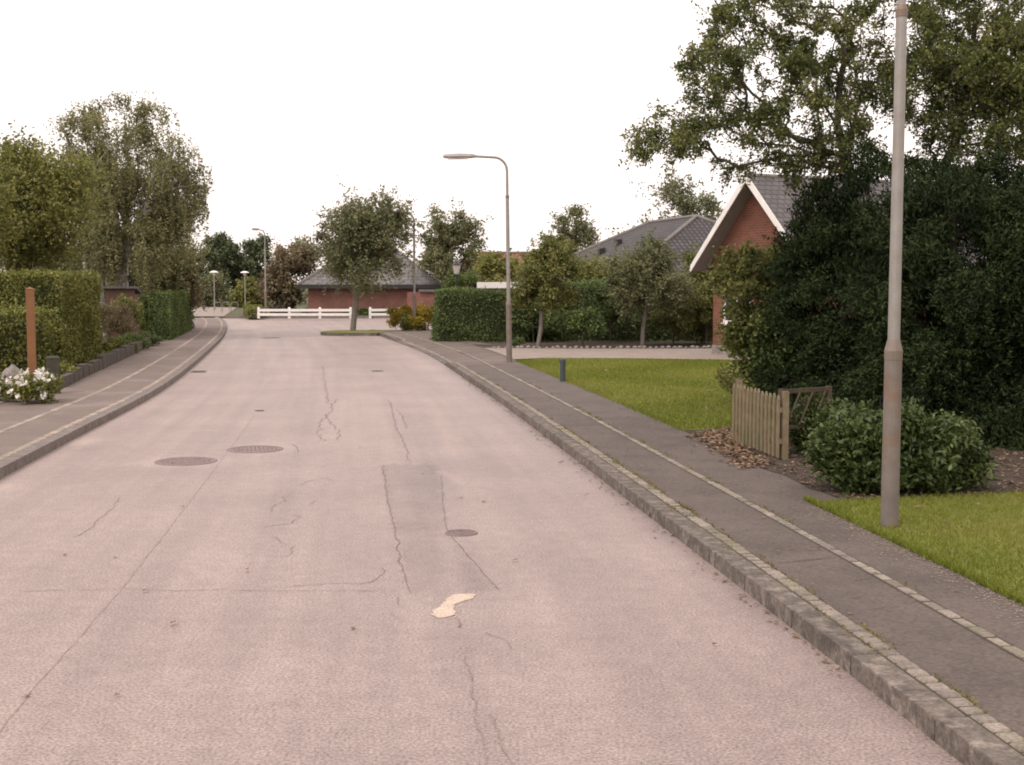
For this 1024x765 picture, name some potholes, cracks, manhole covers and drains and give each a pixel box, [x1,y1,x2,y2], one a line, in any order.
manhole cover [154,457,218,466]
crack [463,654,513,765]
manhole cover [227,445,284,453]
crack [12,466,410,617]
crack [316,366,341,442]
